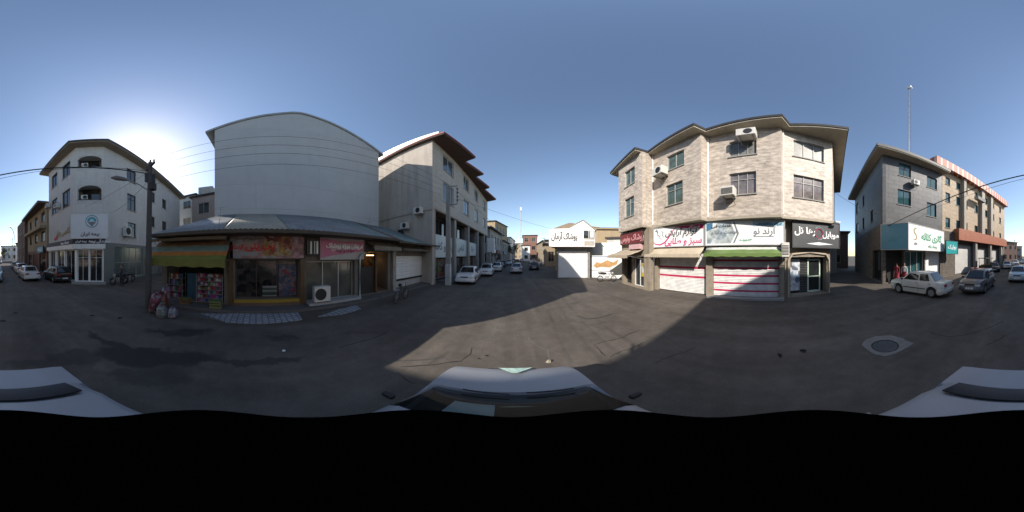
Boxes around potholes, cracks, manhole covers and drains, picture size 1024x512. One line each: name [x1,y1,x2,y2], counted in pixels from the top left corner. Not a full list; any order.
crack [927,321,1006,346]
manhole cover [862,335,914,357]
crack [400,318,500,384]
crack [594,330,695,364]
